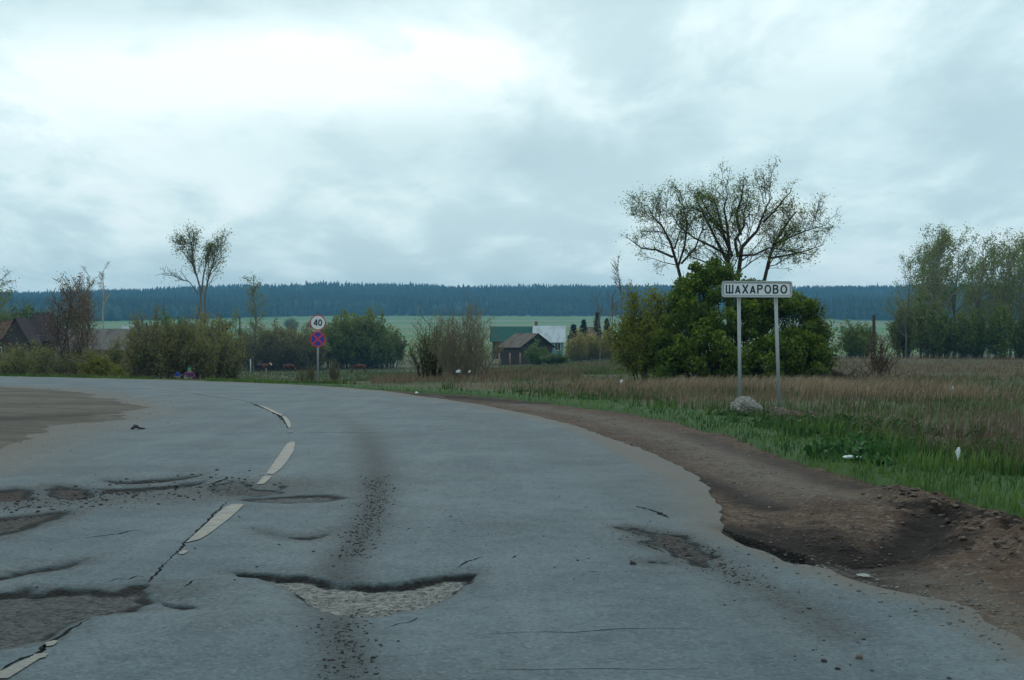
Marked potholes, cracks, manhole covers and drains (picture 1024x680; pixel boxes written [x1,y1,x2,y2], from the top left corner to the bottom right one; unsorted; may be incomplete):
pothole [41,484,99,501]
pothole [0,487,41,502]
pothole [609,526,723,571]
pothole [103,474,201,484]
pothole [0,583,159,650]
pothole [231,571,482,617]
pothole [0,510,76,537]
crack [636,506,669,518]
pothole [206,479,291,497]
crack [110,502,226,582]
pothole [234,494,351,504]
